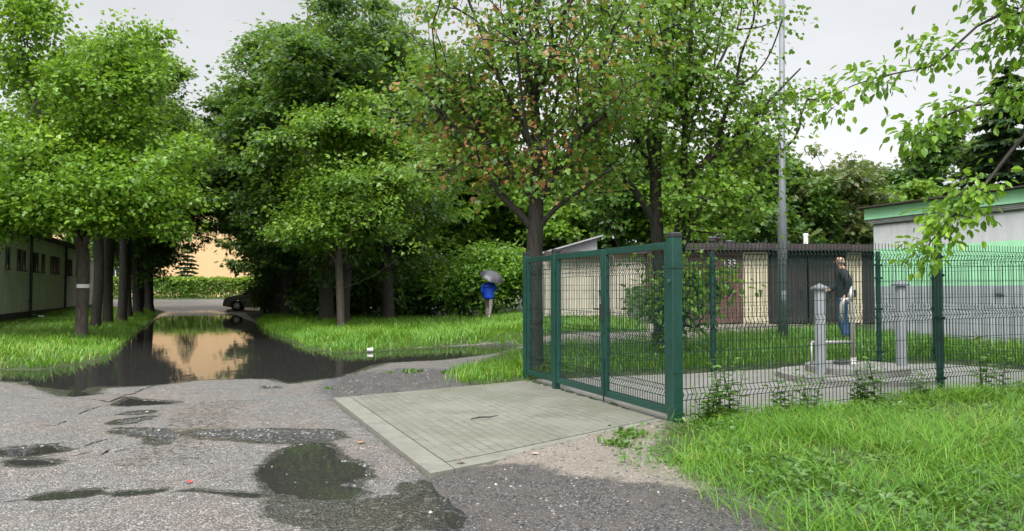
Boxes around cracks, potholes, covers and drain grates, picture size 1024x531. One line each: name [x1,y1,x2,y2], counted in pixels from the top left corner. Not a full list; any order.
pothole [118,416,153,424]
pothole [254,442,372,501]
pothole [117,397,176,406]
crack [36,385,154,426]
pothole [441,510,468,528]
pothole [115,428,180,443]
pothole [0,444,66,456]
pothole [185,429,344,444]
